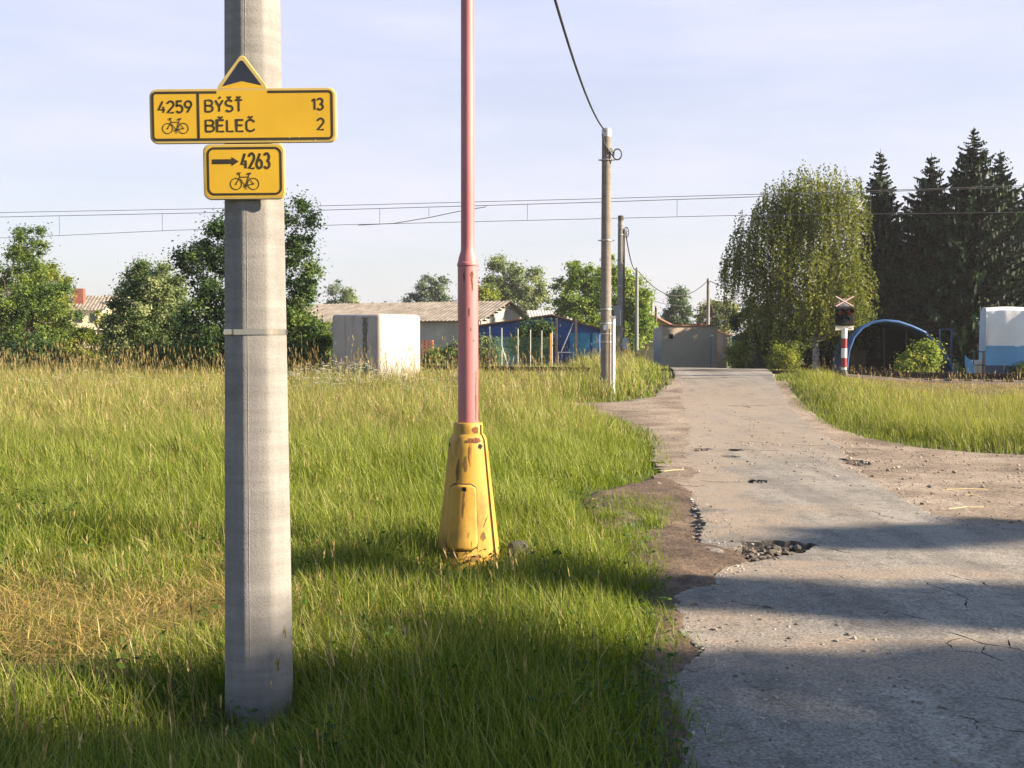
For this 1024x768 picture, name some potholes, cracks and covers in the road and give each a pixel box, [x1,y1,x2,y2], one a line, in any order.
crack [927,574,1005,609]
crack [943,712,1024,732]
crack [878,607,1024,662]
pothole [727,540,820,562]
